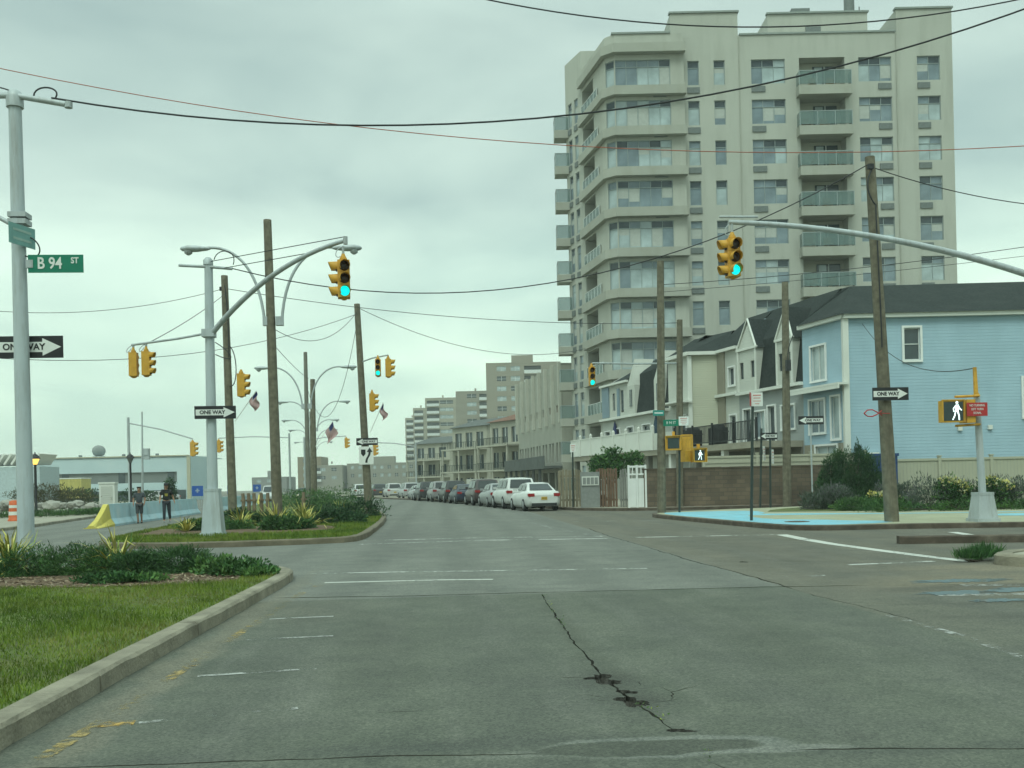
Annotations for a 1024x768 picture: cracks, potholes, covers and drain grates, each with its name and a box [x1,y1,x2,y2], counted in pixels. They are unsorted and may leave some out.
crack [542,594,725,768]
